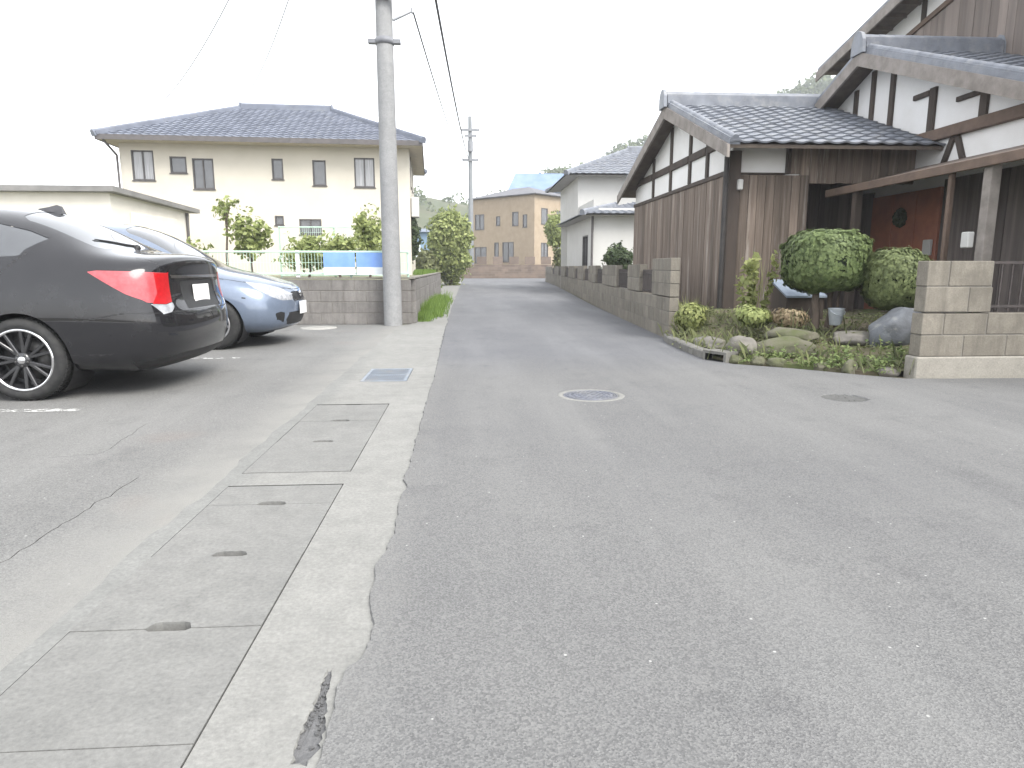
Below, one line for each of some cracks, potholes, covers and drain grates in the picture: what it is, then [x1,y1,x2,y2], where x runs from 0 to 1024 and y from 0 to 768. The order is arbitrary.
pothole [290,667,333,766]
drain grate [360,368,413,382]
manhole cover [557,389,625,402]
crack [0,476,140,563]
